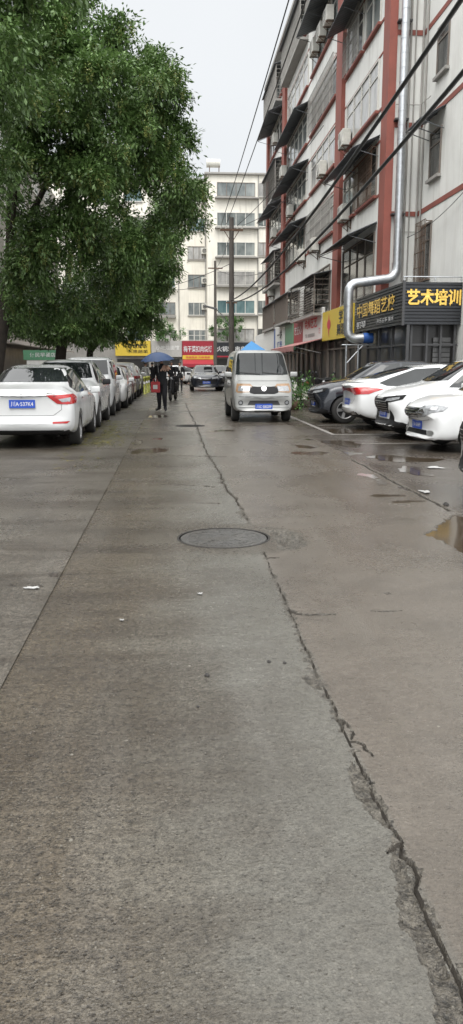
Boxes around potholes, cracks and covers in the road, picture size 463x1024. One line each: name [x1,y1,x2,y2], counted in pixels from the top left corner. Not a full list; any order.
manhole cover [177,528,270,548]
crack [160,403,463,1024]
